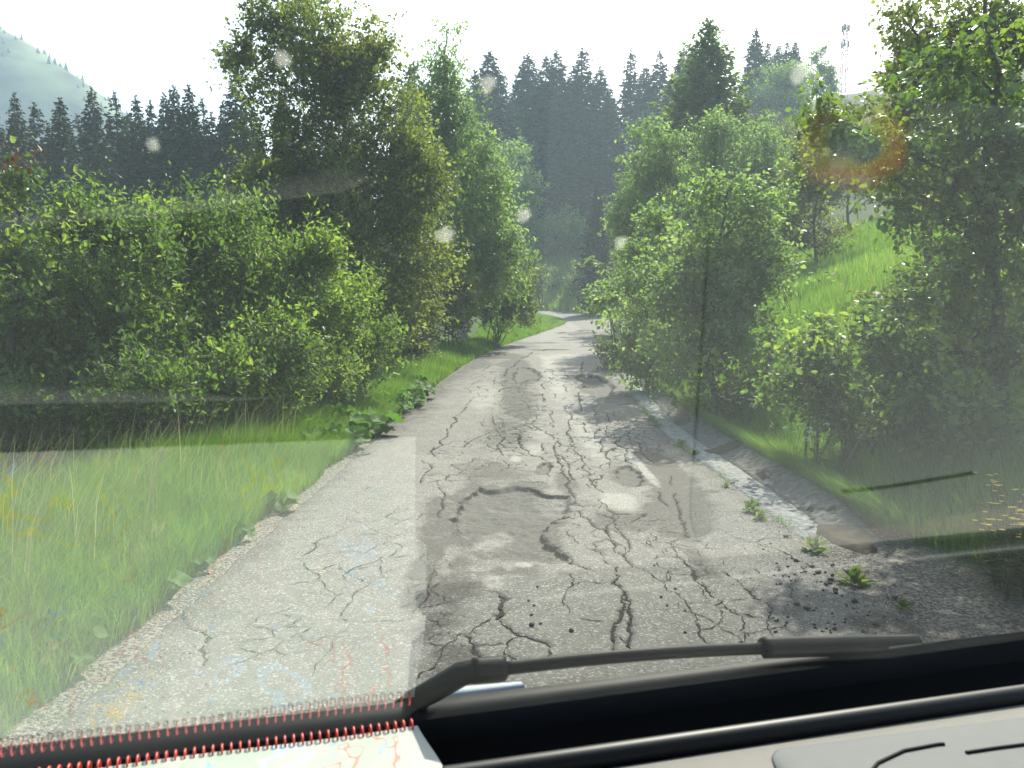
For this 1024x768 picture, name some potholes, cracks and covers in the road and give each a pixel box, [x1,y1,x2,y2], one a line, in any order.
pothole [447,484,578,564]
crack [181,611,211,666]
pothole [612,465,646,487]
pothole [574,374,618,398]
pothole [533,462,555,475]
crack [295,332,835,678]
crack [231,607,360,676]
